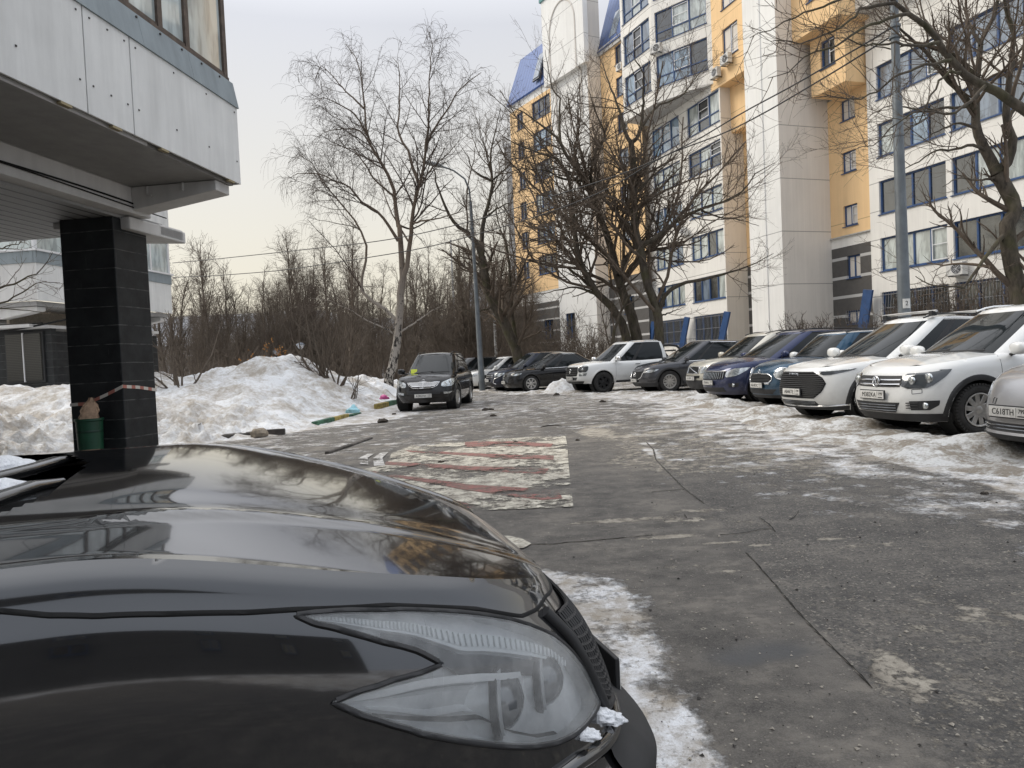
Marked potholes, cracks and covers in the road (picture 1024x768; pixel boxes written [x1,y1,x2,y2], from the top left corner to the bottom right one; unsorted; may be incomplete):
crack [720,510,799,535]
